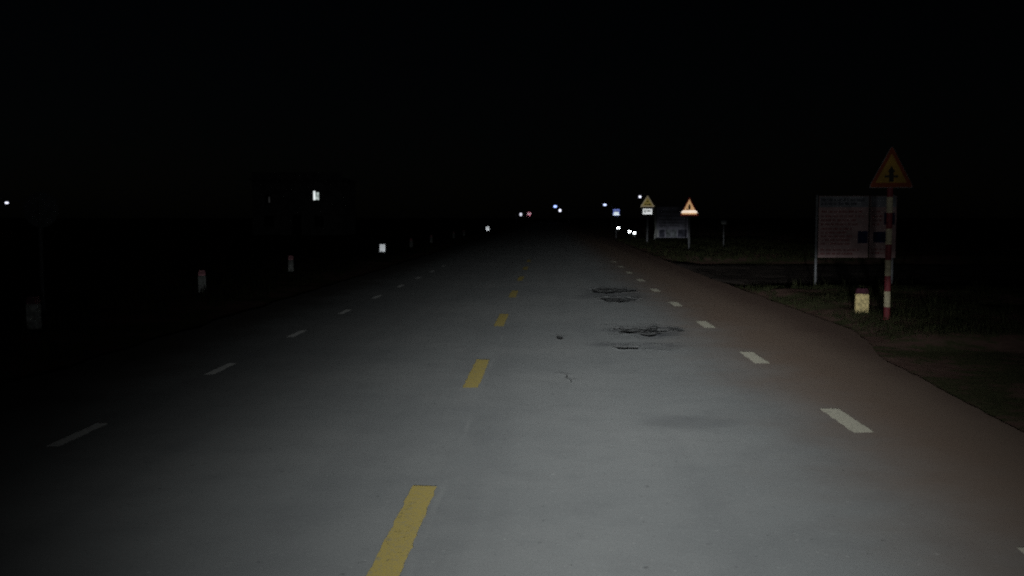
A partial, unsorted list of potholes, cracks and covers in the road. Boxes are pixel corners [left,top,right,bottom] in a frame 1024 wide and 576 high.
pothole [587,286,641,294]
pothole [610,324,677,338]
crack [556,372,579,382]
